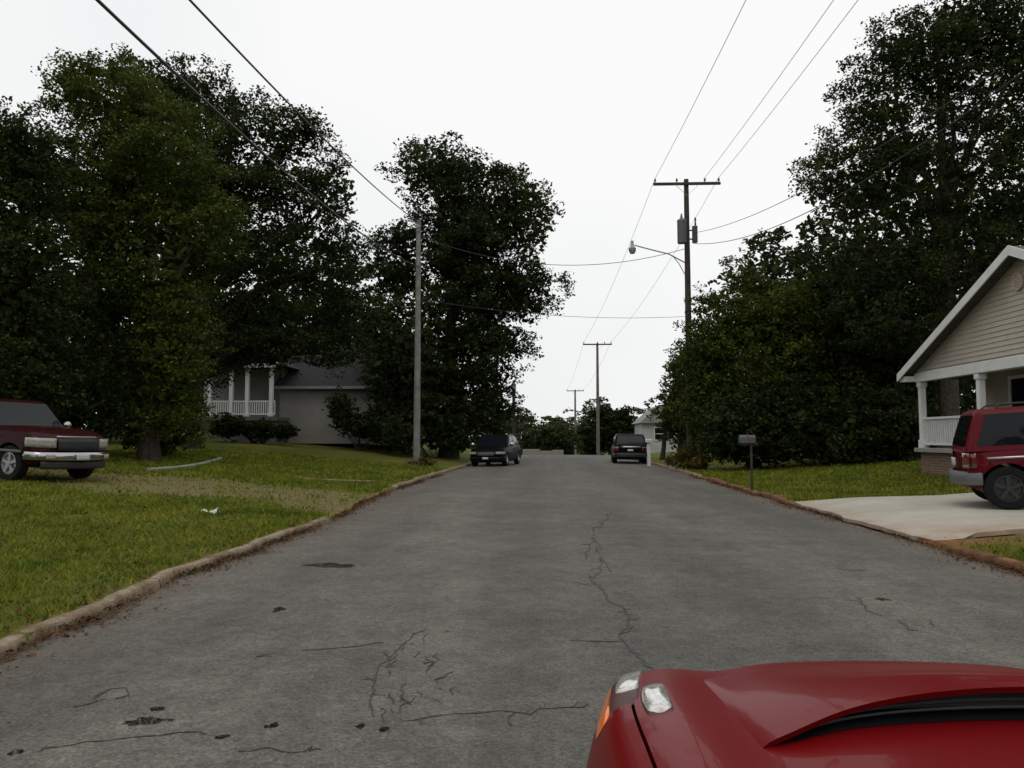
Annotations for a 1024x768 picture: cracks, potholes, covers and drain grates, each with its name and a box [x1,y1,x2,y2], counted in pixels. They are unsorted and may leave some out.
pothole [293,561,364,570]
crack [307,629,588,726]
pothole [106,713,191,732]
crack [853,597,935,631]
crack [74,687,130,707]
crack [569,512,654,670]
crack [26,731,322,754]
